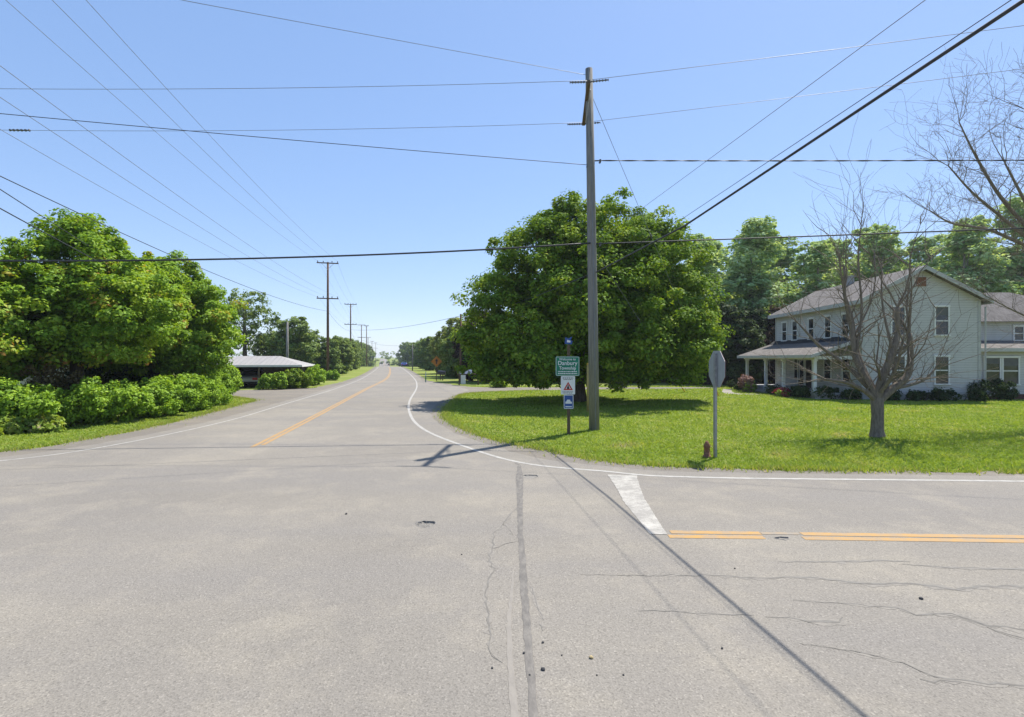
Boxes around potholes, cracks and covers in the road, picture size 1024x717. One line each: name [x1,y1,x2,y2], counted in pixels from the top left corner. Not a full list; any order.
pothole [415,520,437,528]
crack [482,508,546,663]
crack [581,559,1024,689]
